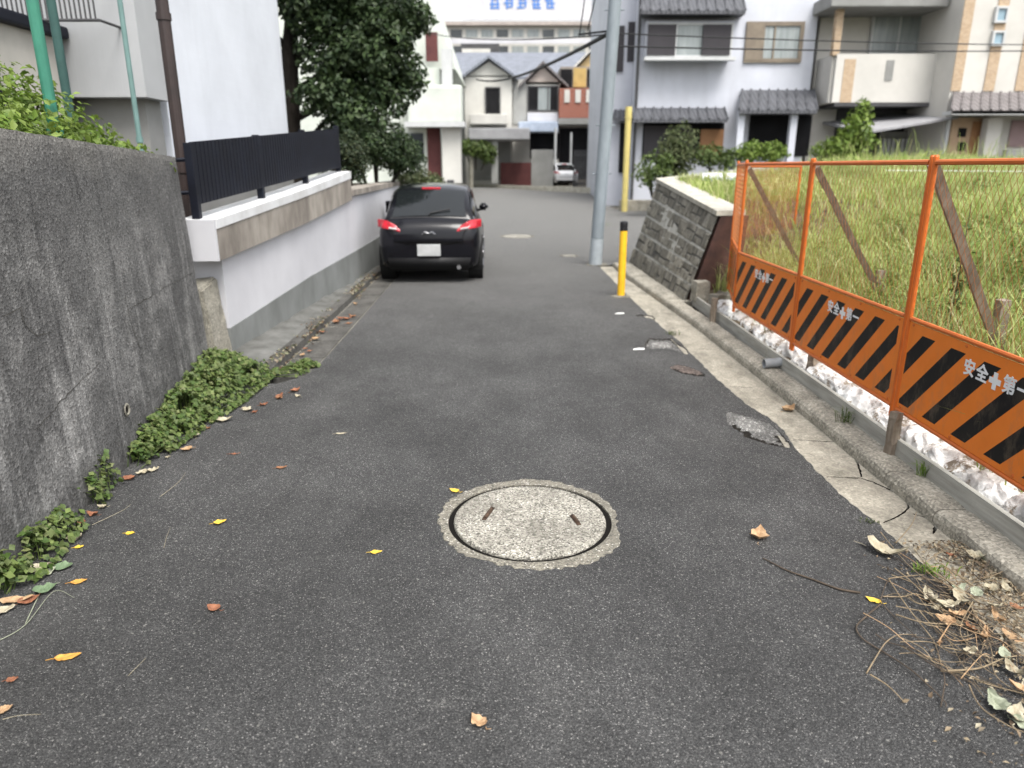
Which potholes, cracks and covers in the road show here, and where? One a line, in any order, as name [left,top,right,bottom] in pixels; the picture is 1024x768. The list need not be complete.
pothole [645,337,689,354]
pothole [726,412,791,447]
manhole cover [437,479,621,571]
crack [837,463,955,543]
